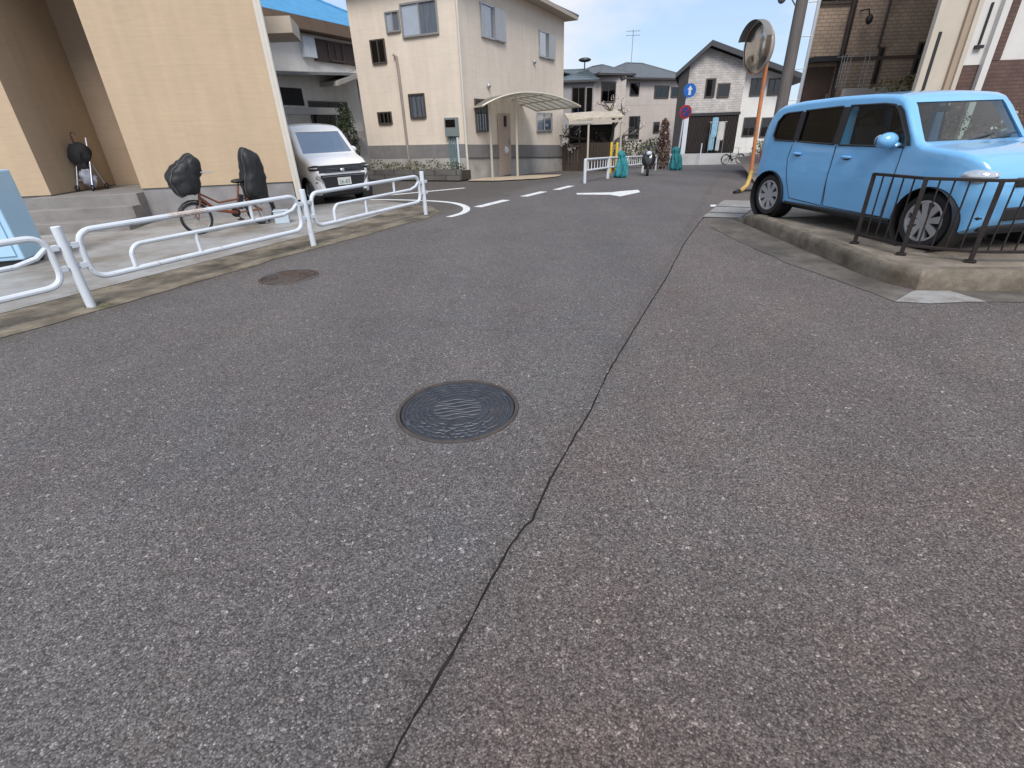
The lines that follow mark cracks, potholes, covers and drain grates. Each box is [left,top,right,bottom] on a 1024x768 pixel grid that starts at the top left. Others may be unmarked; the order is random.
manhole cover [396,380,519,444]
manhole cover [258,269,319,285]
crack [385,218,704,768]
